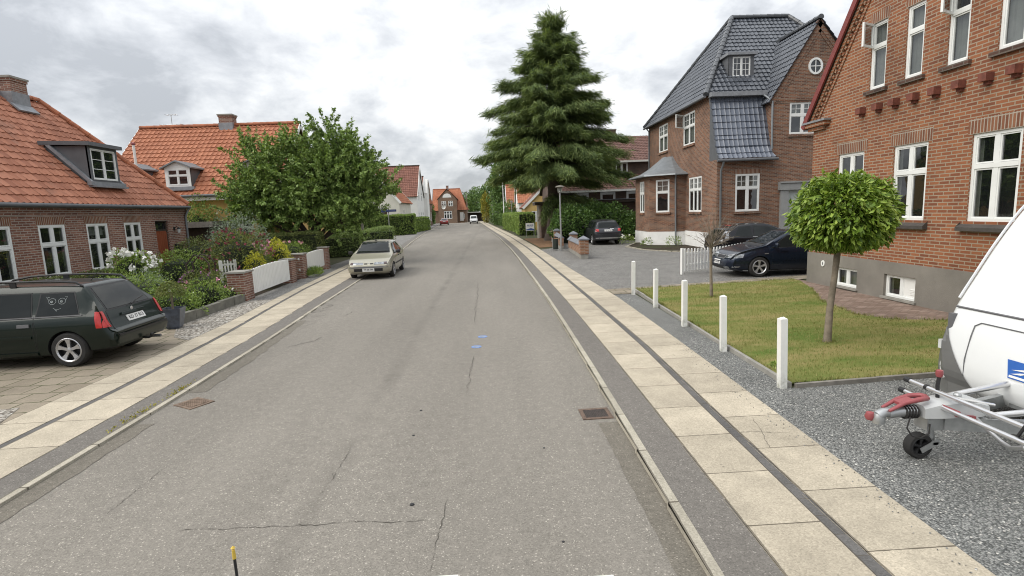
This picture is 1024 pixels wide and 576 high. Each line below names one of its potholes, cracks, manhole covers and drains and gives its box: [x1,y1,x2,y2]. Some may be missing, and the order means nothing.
crack [184,520,419,530]
drain grate [173,397,215,410]
drain grate [578,407,614,420]
